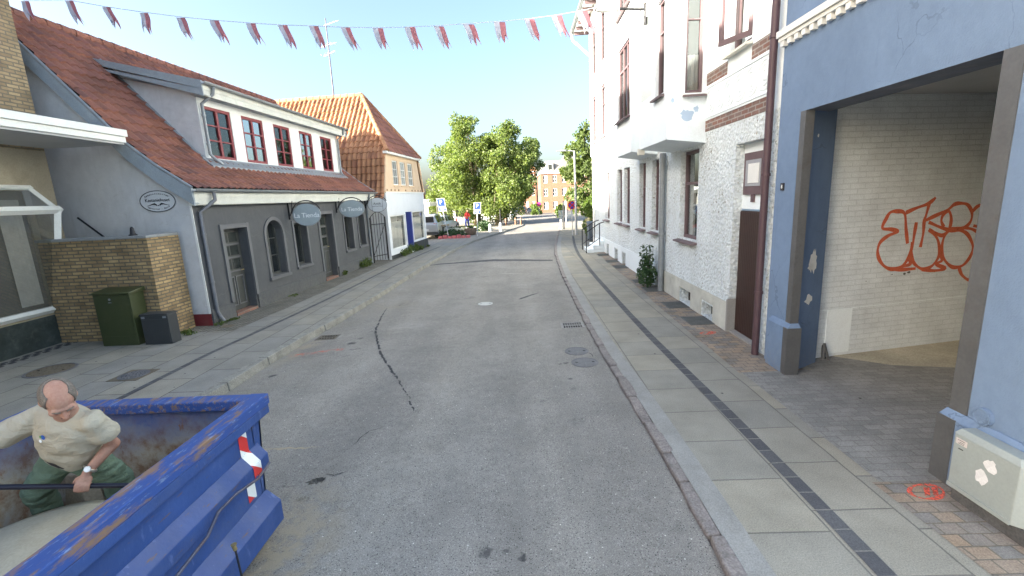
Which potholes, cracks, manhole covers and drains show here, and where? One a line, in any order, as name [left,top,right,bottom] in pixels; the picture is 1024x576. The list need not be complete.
crack [372,303,414,411]
manhole cover [565,347,589,355]
manhole cover [21,362,79,378]
manhole cover [571,357,599,367]
